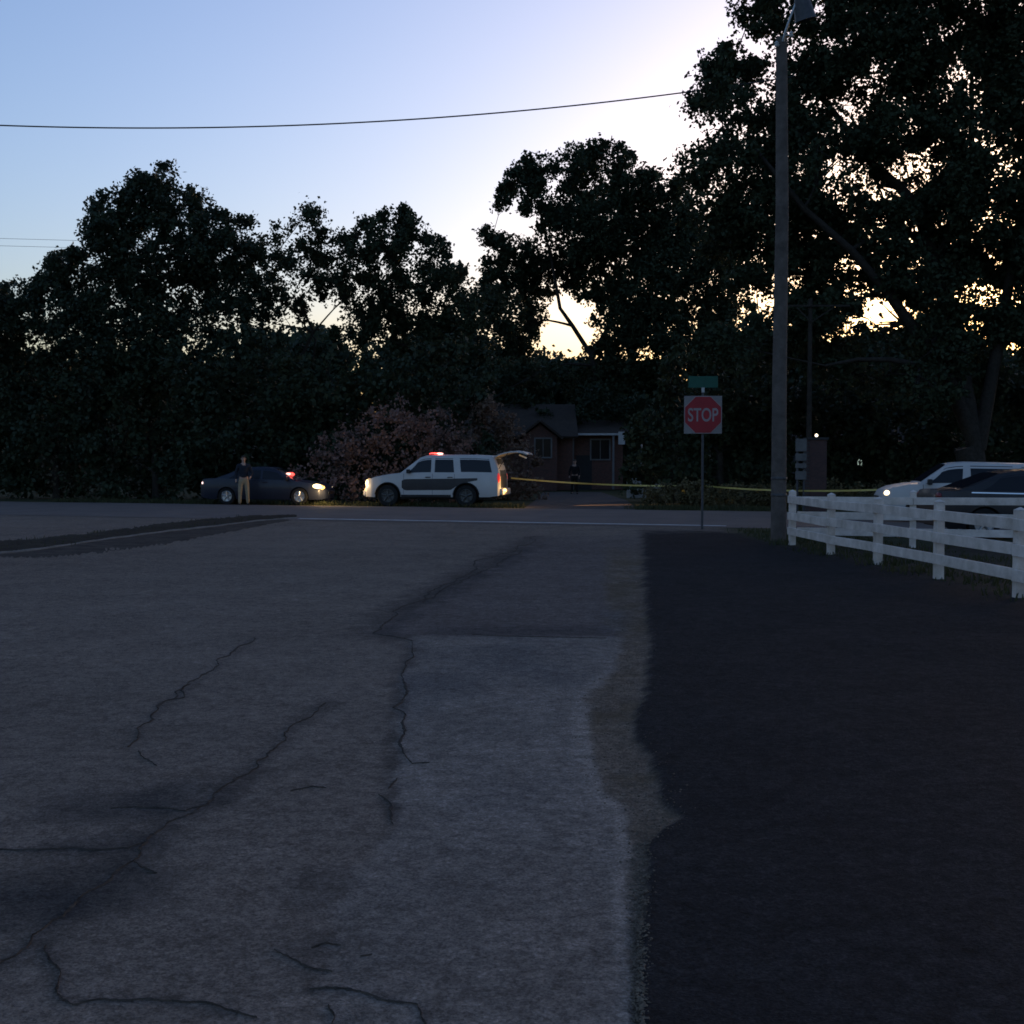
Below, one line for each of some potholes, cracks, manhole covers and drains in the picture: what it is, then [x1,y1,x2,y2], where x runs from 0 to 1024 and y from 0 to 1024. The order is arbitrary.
crack [0,639,326,1018]
crack [274,942,427,1024]
